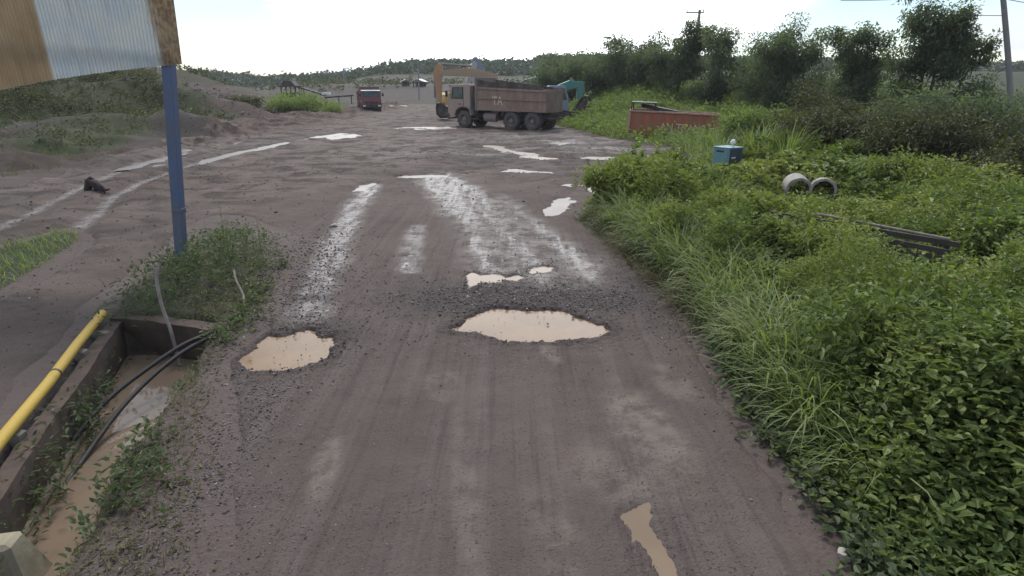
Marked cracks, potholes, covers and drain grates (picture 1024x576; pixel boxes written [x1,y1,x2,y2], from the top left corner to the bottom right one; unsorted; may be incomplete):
pothole [456,269,536,293]
pothole [597,486,707,576]
pothole [518,263,565,277]
pothole [429,299,632,351]
pothole [230,321,356,384]
